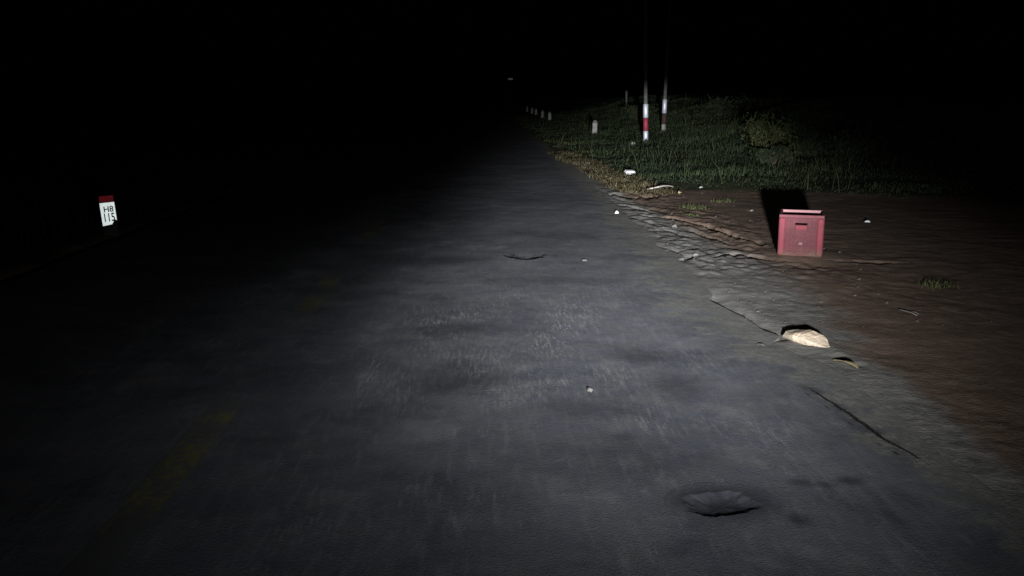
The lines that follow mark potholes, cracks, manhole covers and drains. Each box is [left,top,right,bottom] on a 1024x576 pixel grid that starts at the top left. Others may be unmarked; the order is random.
pothole [665,482,780,525]
crack [795,385,940,465]
